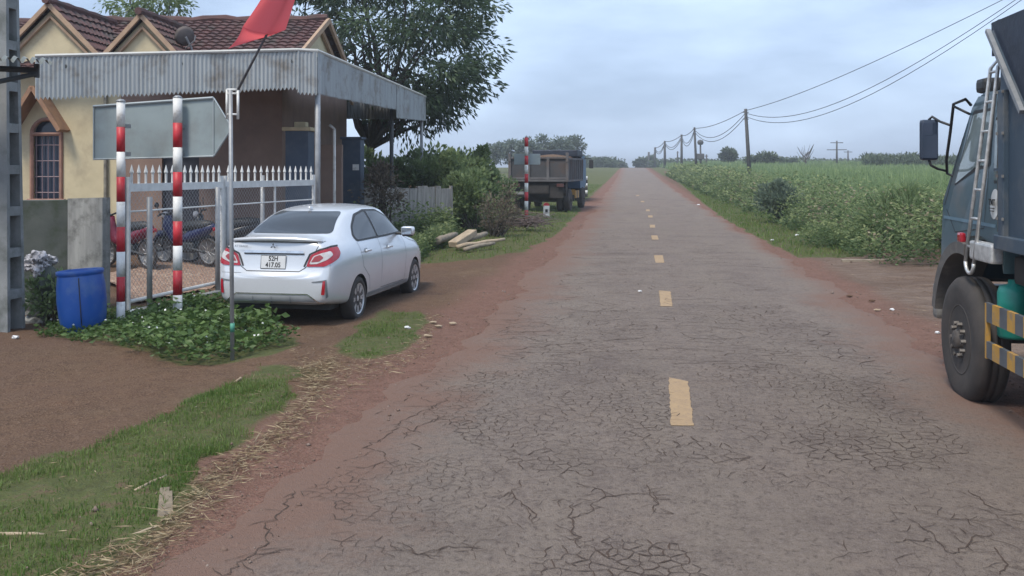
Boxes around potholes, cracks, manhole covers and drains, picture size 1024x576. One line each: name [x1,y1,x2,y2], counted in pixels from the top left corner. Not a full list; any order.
crack [213,230,918,576]
crack [645,364,1024,576]
